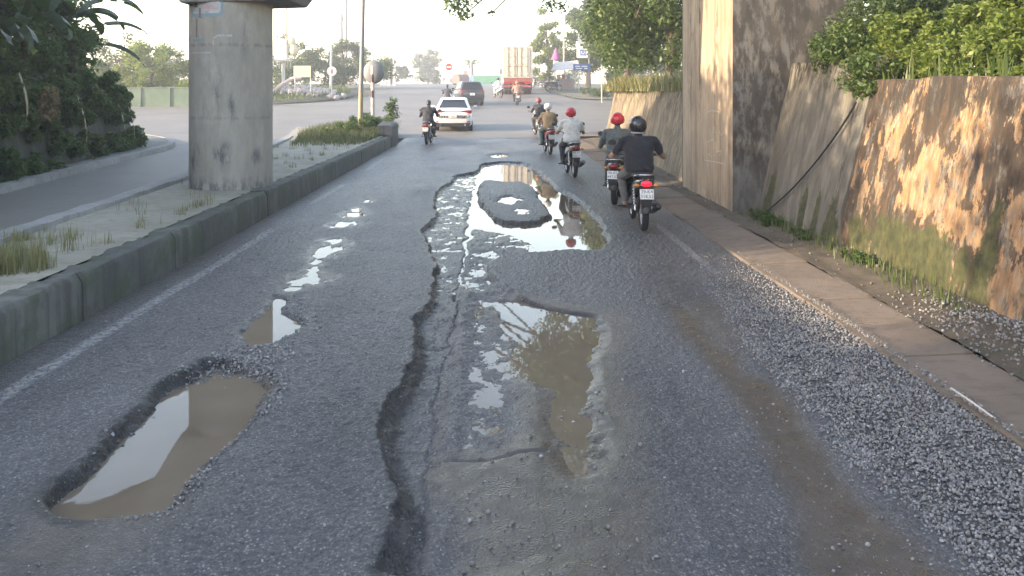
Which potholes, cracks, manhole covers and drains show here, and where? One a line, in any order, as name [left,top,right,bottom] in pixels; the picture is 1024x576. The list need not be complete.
pothole [232,293,313,345]
crack [413,338,451,352]
pothole [33,356,288,526]
crack [426,448,550,472]
pothole [368,161,647,576]
